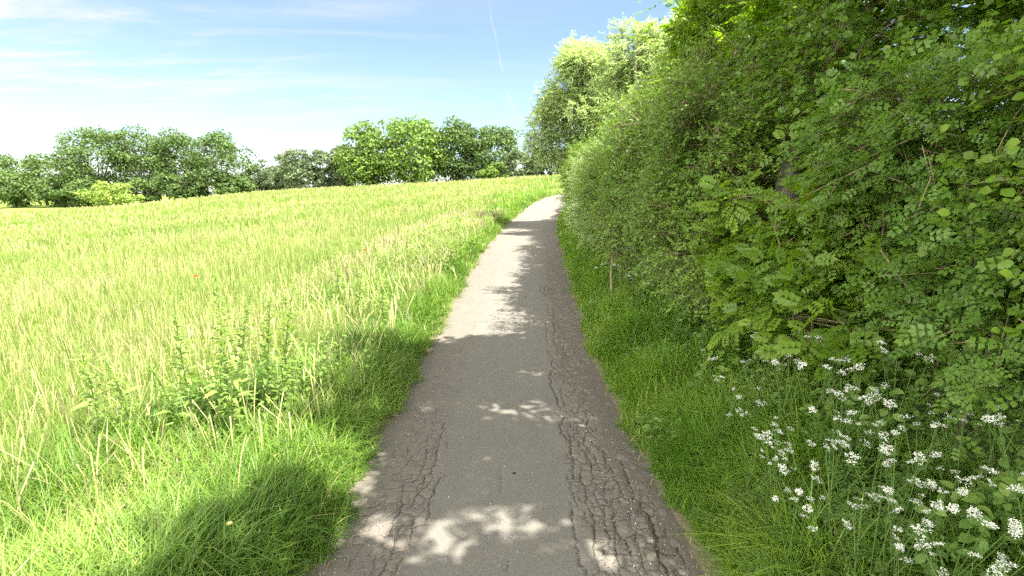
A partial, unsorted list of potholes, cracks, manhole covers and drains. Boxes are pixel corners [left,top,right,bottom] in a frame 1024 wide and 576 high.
crack [549,370,686,576]
crack [539,284,570,376]
crack [348,408,448,576]
